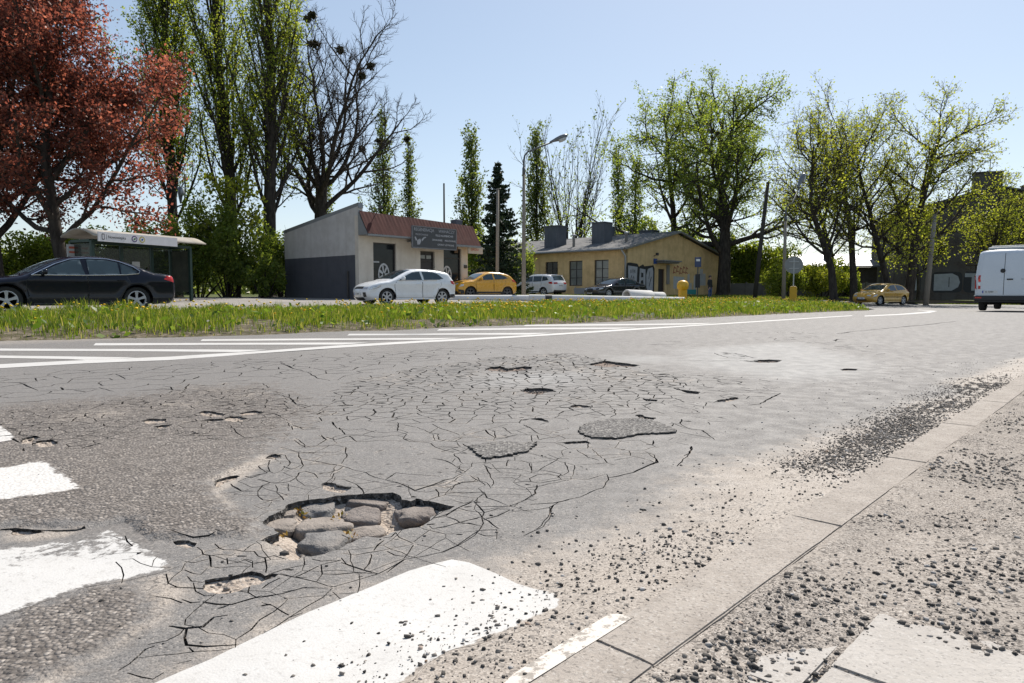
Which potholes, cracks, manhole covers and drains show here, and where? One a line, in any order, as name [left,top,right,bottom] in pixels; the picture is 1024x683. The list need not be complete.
pothole [202,571,278,594]
pothole [321,482,351,493]
pothole [214,475,239,487]
crack [115,353,715,680]
pothole [262,492,455,560]
crack [0,346,534,457]
pothole [34,439,58,447]
